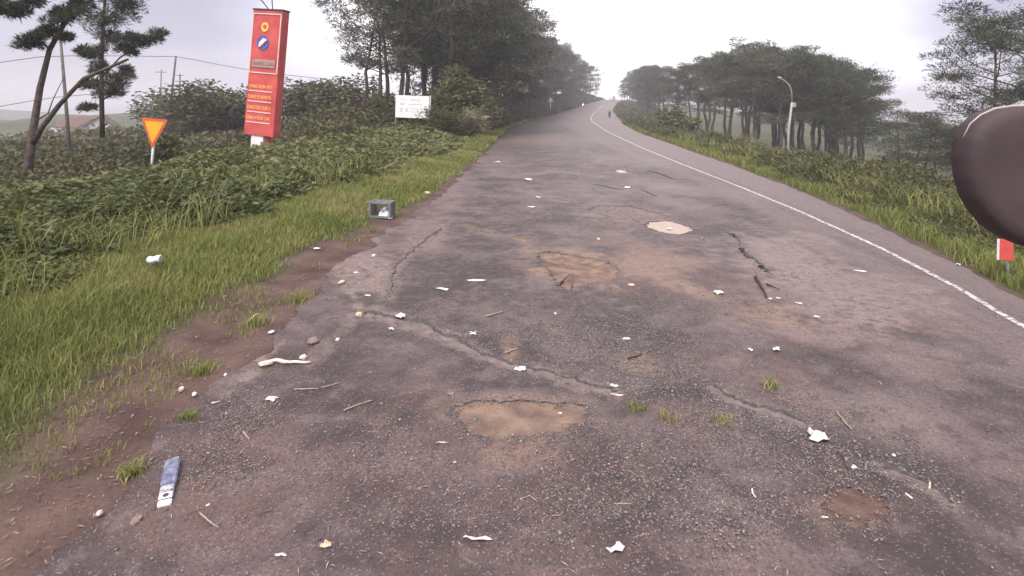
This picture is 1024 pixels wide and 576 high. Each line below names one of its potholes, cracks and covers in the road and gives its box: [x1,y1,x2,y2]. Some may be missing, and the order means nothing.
pothole [451,399,593,441]
crack [834,449,954,503]
pothole [820,484,890,528]
crack [362,228,616,393]
pothole [536,251,621,292]
crack [726,232,772,275]
crack [707,384,809,426]
